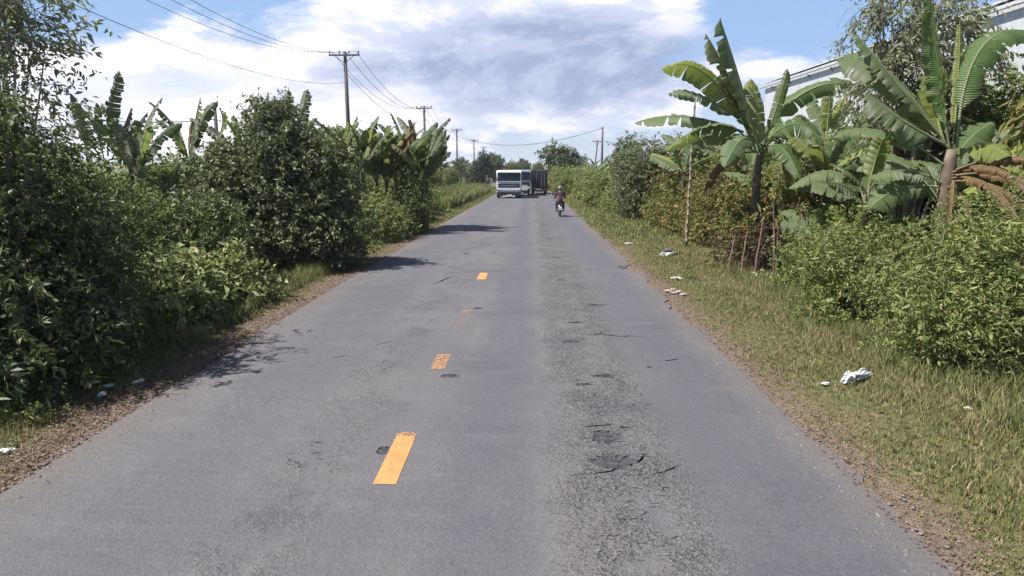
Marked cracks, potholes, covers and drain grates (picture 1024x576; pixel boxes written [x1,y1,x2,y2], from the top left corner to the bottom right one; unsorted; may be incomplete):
pothole [592,430,624,444]
crack [573,378,679,561]
crack [286,441,345,470]
pothole [590,453,638,470]
